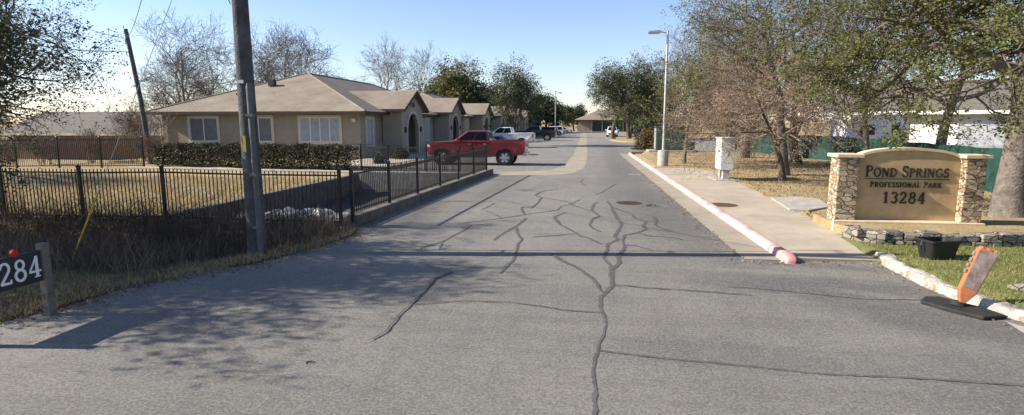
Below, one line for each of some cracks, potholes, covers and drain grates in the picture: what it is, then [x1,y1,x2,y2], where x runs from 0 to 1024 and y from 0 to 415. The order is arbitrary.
crack [371,179,1024,415]
